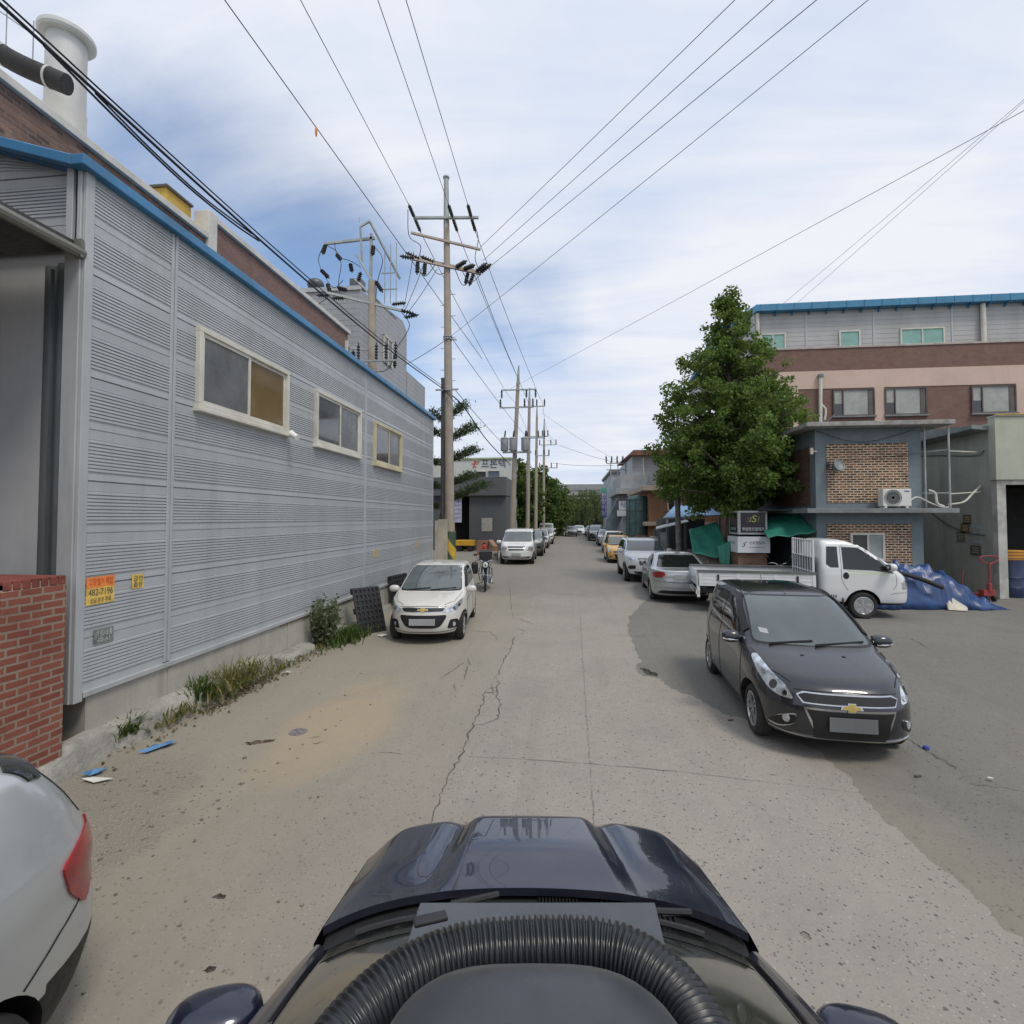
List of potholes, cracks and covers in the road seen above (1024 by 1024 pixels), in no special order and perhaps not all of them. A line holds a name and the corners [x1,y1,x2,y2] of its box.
crack [431,588,532,823]
manhole cover [289,728,307,736]
